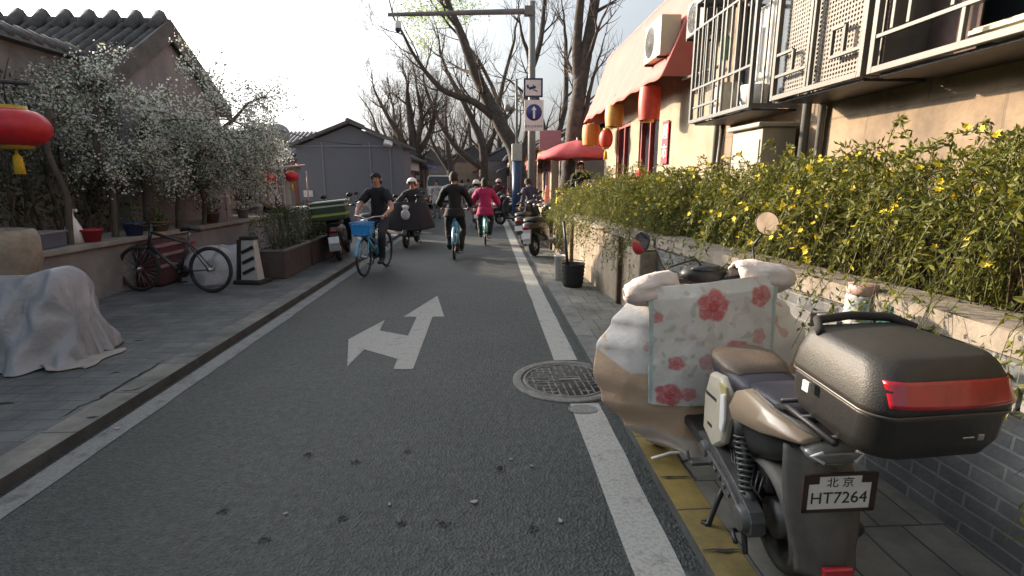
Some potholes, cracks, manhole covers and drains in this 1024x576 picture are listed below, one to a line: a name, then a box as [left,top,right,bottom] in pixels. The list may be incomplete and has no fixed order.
manhole cover [513,361,601,403]
